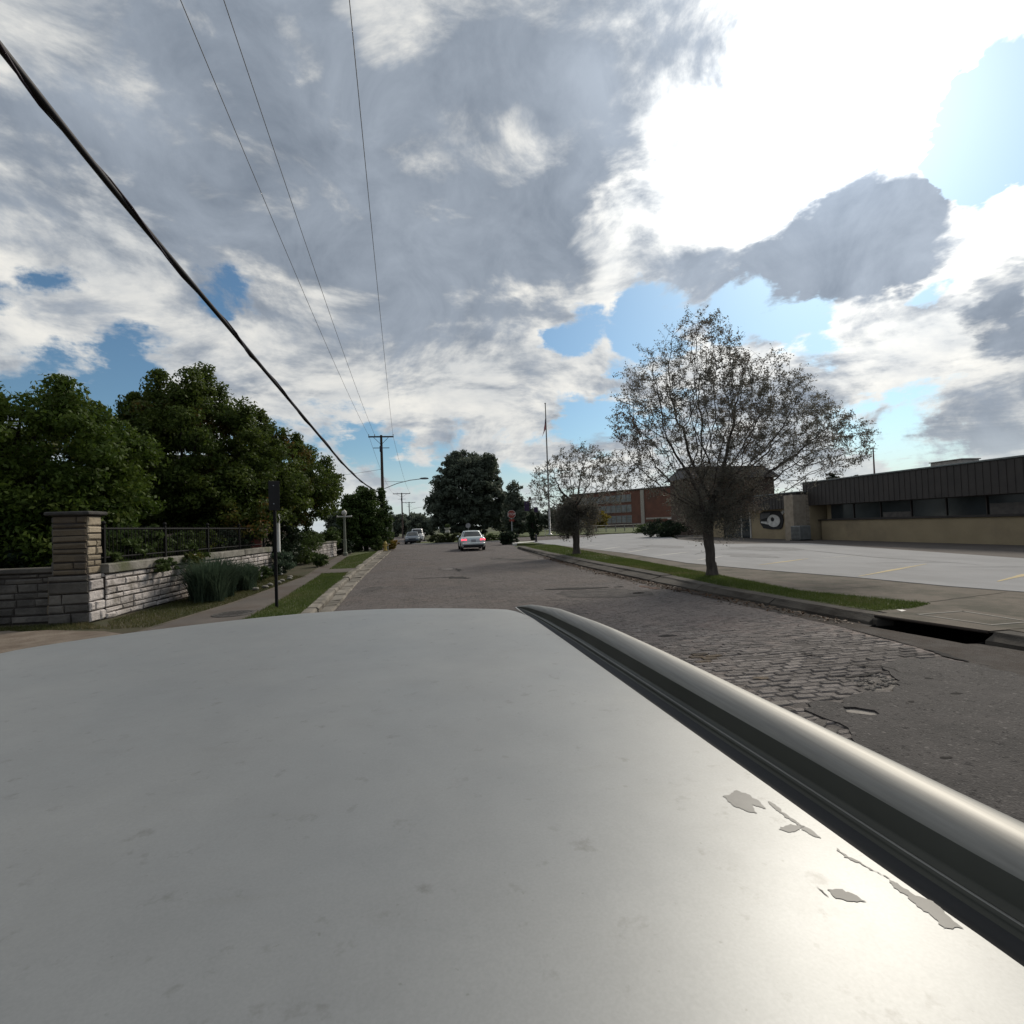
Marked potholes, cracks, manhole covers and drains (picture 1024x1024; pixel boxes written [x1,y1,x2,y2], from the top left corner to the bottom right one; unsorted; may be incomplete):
pothole [860,678,898,692]
drain grate [870,608,1024,645]
